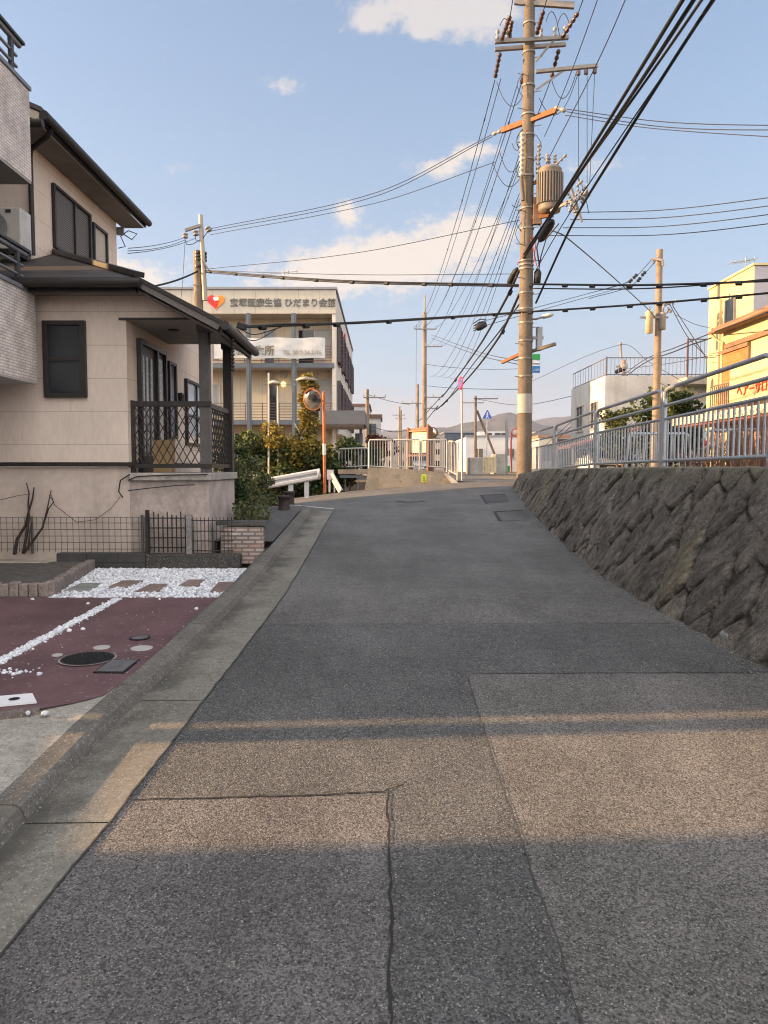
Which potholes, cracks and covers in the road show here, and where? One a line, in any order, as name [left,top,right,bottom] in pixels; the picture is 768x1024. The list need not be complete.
manhole cover [58,651,117,666]
manhole cover [93,659,140,674]
crack [133,783,405,1024]
